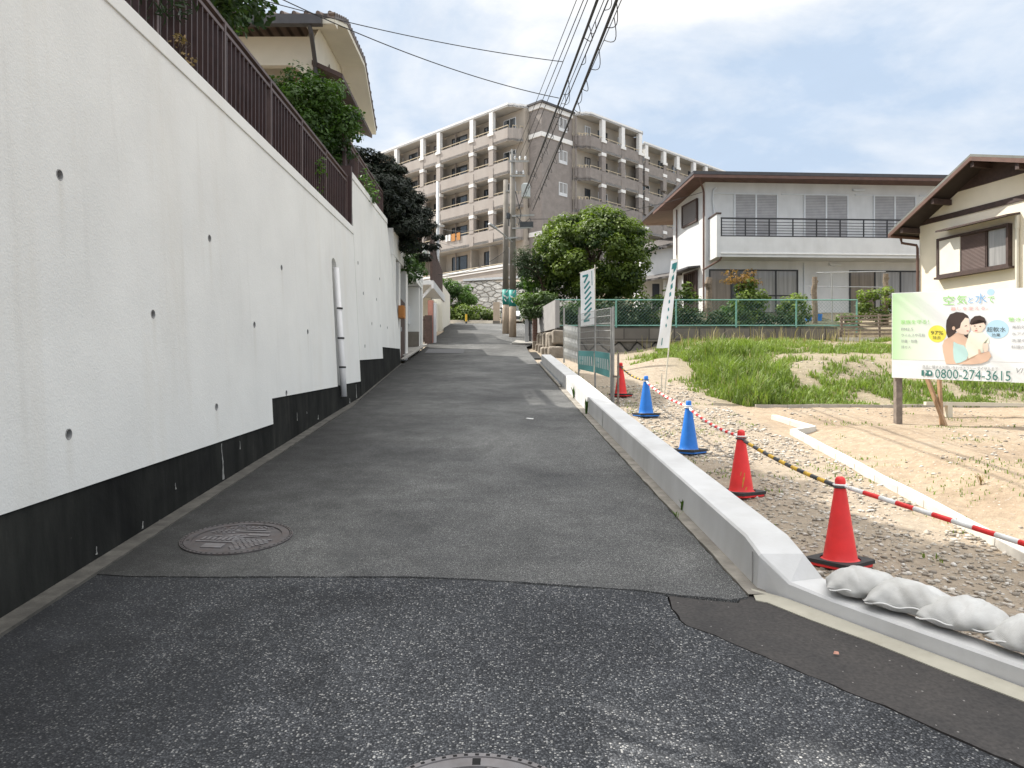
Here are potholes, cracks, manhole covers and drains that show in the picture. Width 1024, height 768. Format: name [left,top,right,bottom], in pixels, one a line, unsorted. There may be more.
manhole cover [179,521,293,556]
manhole cover [406,753,546,768]
